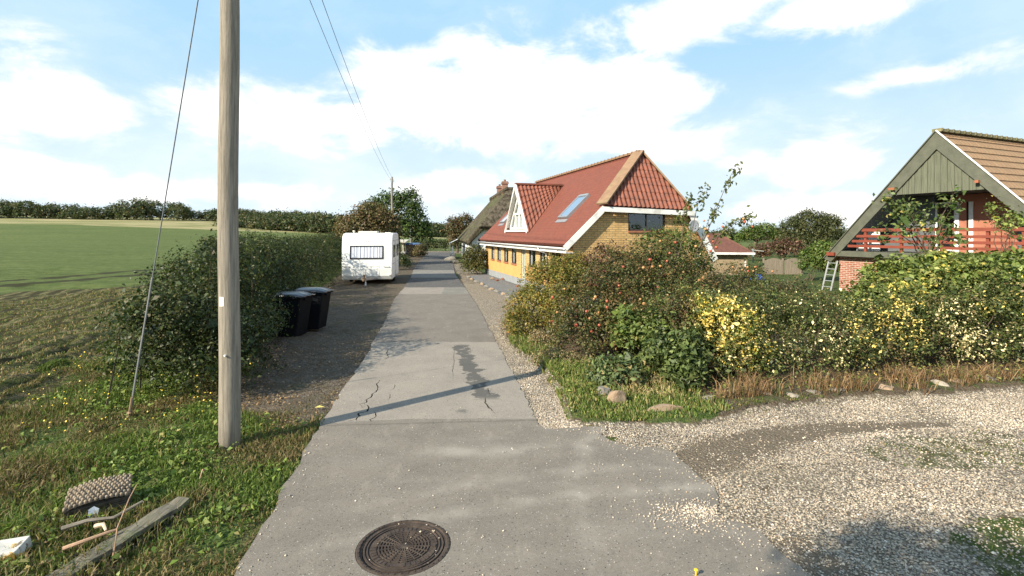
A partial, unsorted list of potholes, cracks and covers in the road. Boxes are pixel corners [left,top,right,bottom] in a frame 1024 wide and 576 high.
manhole cover [355,520,450,576]
